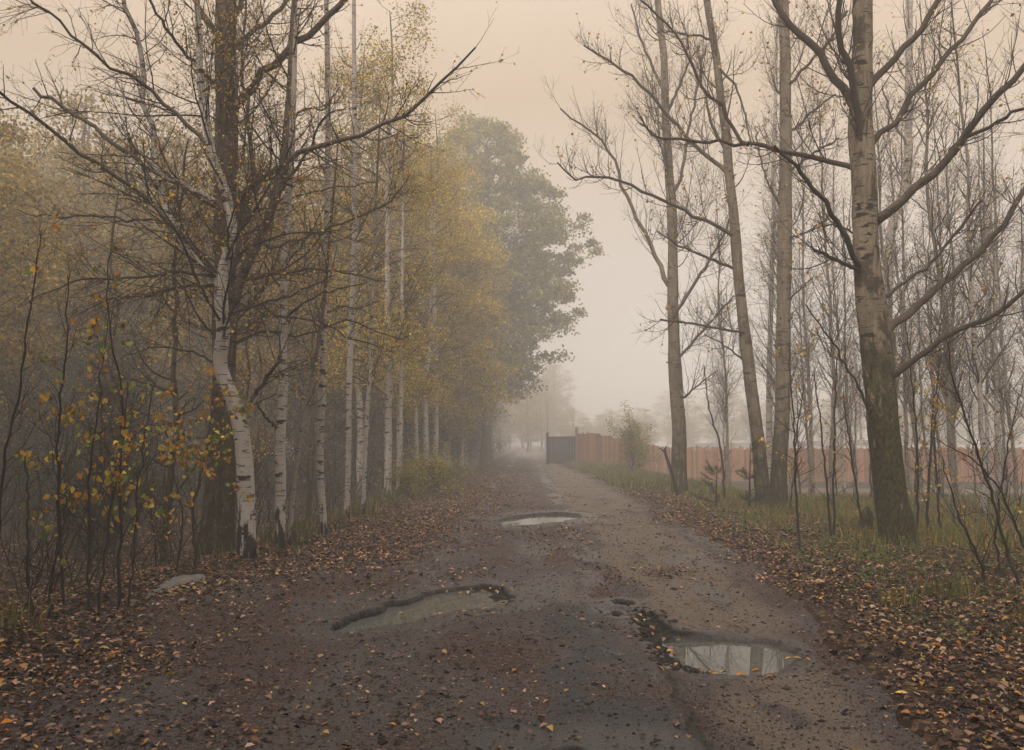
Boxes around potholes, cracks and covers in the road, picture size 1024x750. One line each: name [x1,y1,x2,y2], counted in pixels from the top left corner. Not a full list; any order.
pothole [486,511,586,527]
pothole [601,597,642,607]
pothole [310,581,524,637]
pothole [620,607,823,681]
